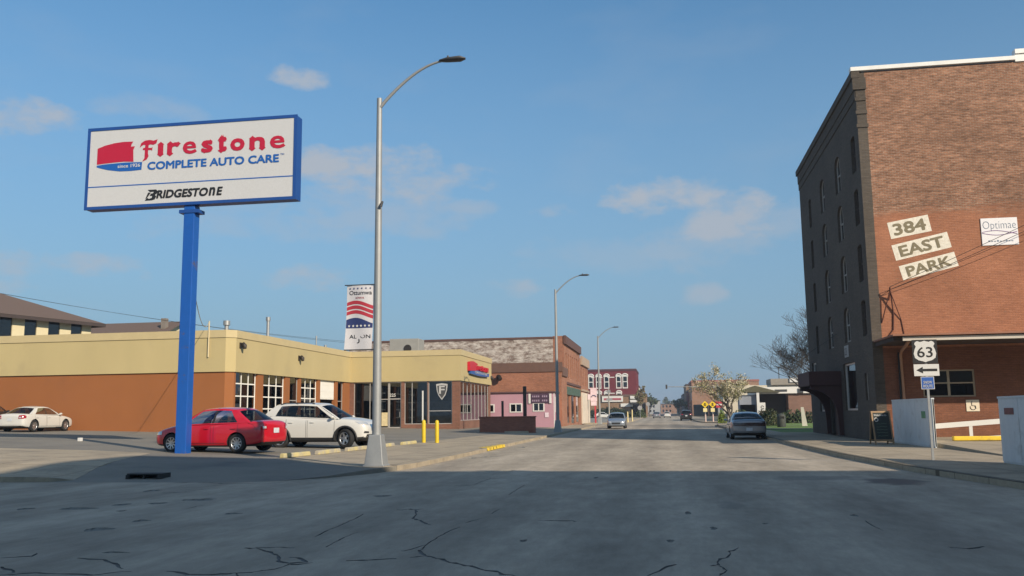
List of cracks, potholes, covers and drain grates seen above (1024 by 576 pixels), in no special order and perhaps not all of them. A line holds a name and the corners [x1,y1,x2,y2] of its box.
crack [711,548,738,576]
crack [0,553,131,576]
crack [168,478,523,576]
